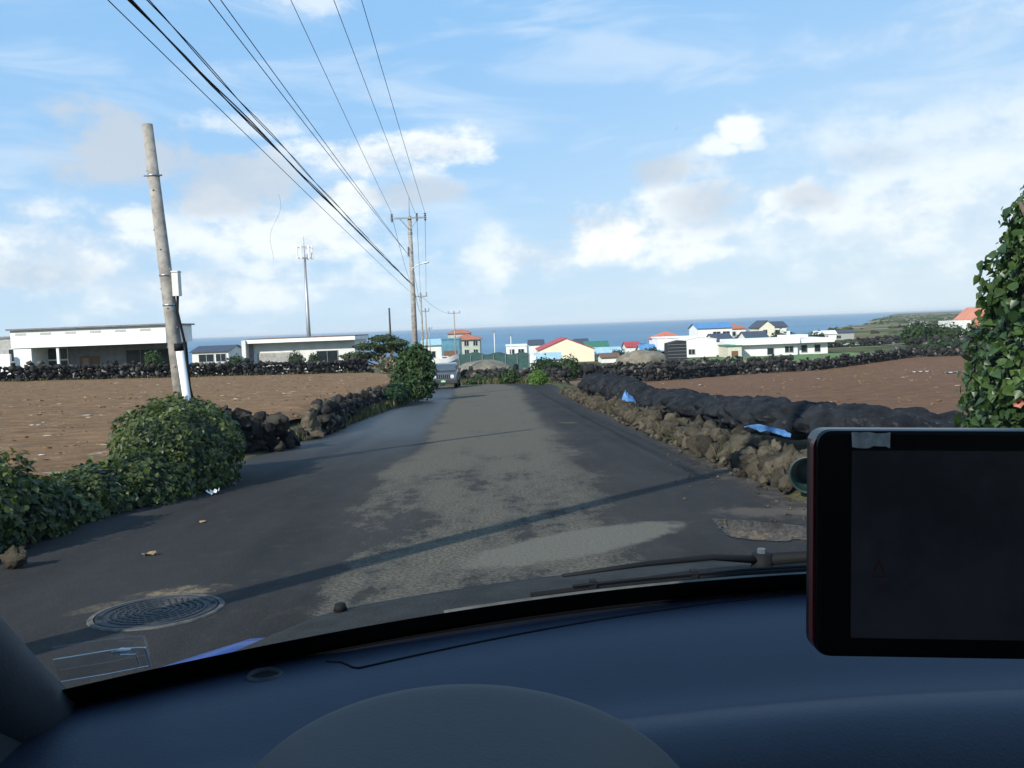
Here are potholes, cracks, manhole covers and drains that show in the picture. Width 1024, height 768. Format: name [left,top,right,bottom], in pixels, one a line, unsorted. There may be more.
manhole cover [86,594,225,632]
